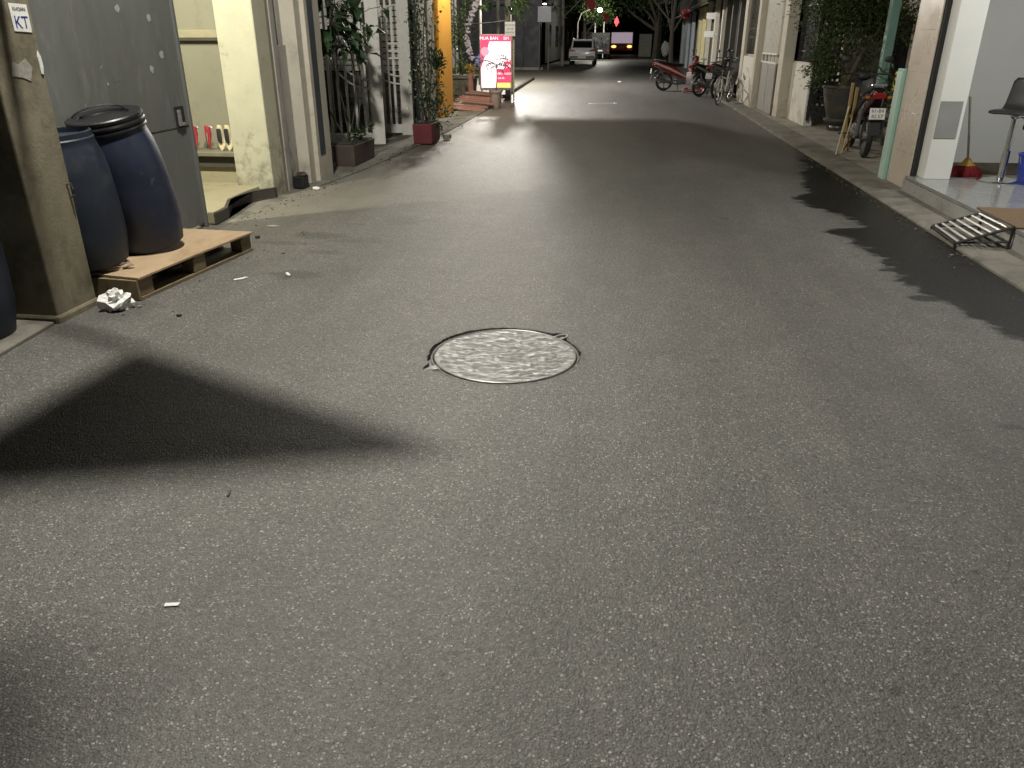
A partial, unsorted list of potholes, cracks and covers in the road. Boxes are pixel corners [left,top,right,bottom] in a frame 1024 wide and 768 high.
manhole cover [424,329,580,385]
